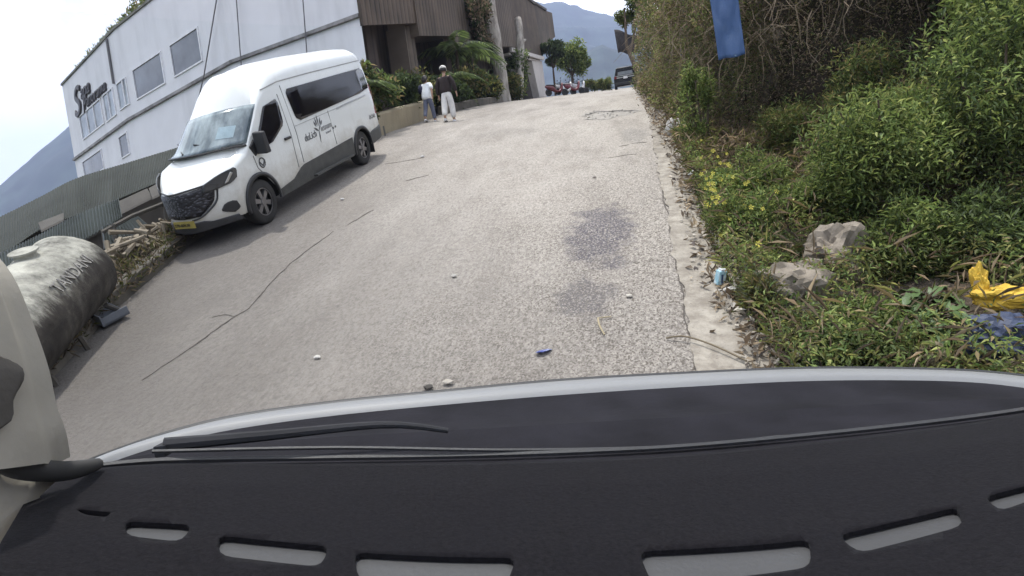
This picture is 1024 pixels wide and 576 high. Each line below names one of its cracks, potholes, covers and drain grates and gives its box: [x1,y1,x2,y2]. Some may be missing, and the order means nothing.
crack [142,232,332,380]
